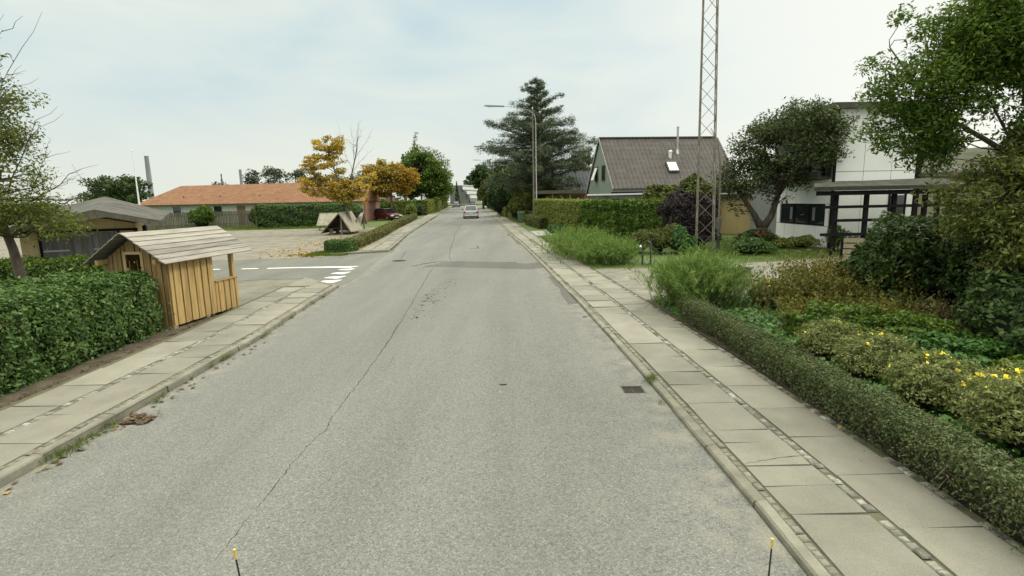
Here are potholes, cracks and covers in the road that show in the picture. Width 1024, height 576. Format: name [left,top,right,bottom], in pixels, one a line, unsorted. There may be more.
crack [214,219,461,561]
